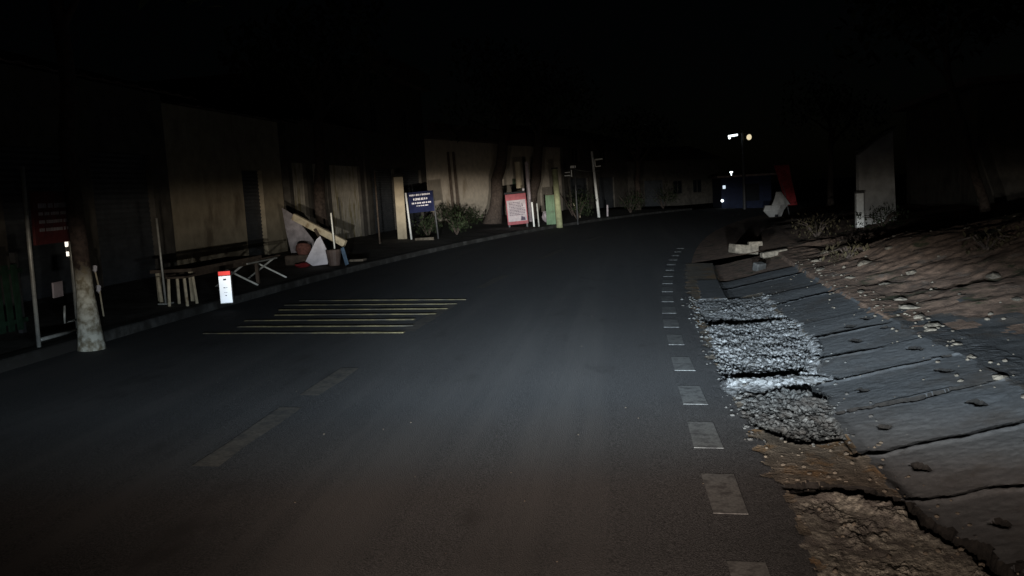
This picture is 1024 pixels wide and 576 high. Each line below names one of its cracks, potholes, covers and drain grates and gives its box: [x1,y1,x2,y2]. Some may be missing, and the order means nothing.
pothole [782,480,1024,576]
